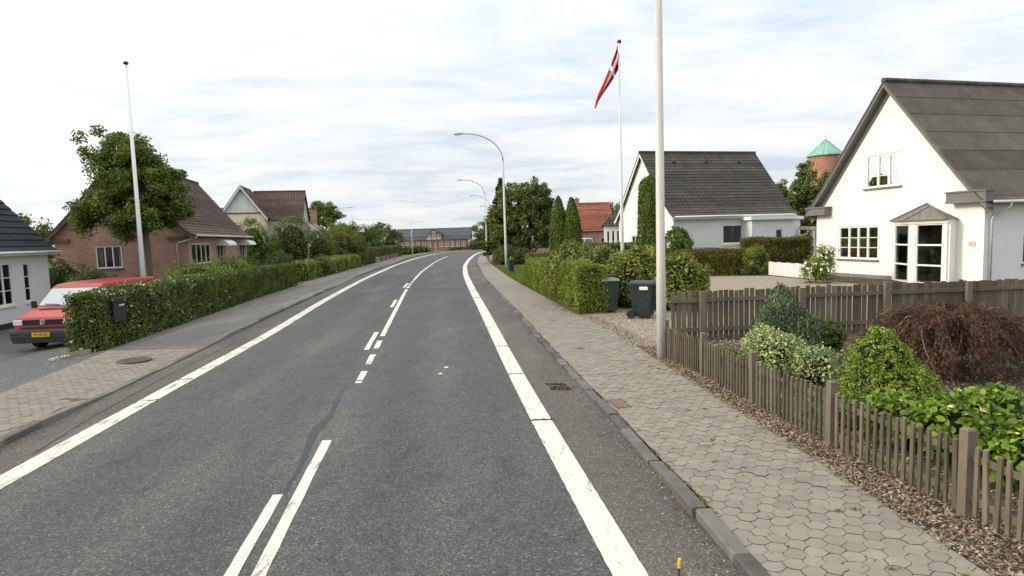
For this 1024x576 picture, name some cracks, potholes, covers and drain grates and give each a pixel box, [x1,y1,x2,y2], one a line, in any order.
utility cover [608,399,632,409]
drain grate [545,383,572,391]
